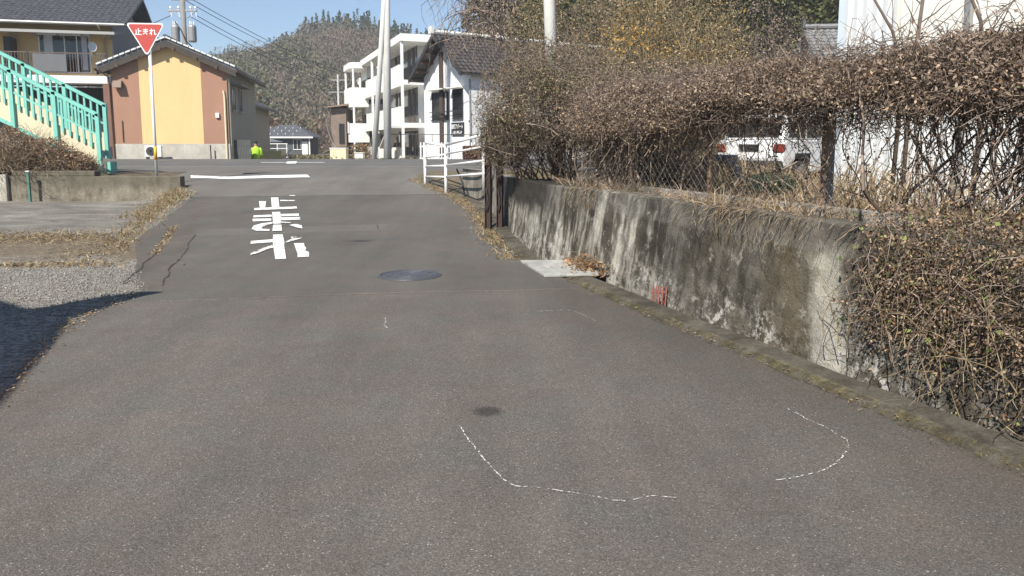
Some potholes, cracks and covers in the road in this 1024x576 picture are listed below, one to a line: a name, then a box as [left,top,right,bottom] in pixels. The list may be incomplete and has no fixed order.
manhole cover [378,269,442,281]
crack [124,228,581,301]
